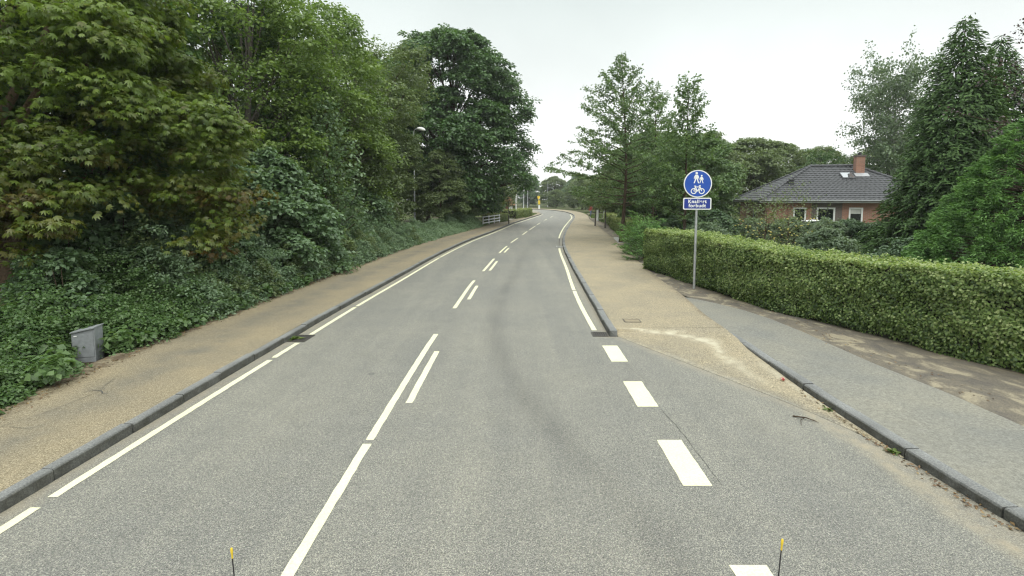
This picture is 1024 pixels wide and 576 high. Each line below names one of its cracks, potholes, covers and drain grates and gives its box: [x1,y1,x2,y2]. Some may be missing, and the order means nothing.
crack [0,364,145,428]
